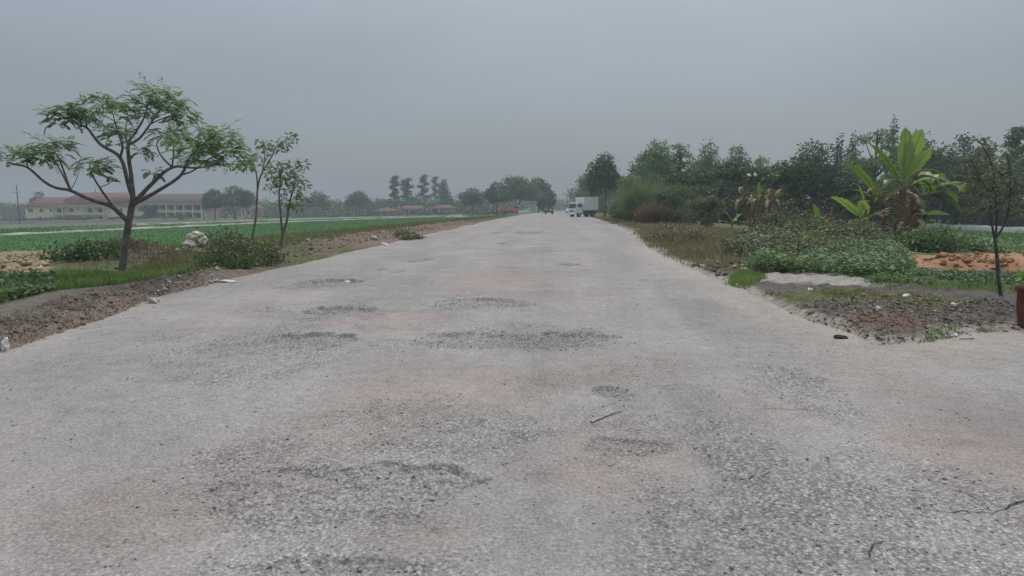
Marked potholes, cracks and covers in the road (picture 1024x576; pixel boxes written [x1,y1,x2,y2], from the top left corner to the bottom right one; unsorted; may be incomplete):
pothole [427,297,533,311]
pothole [290,278,366,288]
crack [940,486,1024,518]
crack [858,537,910,562]
pothole [293,305,388,320]
pothole [550,436,712,459]
pothole [582,384,640,402]
pothole [381,330,625,353]
pothole [231,331,366,352]
